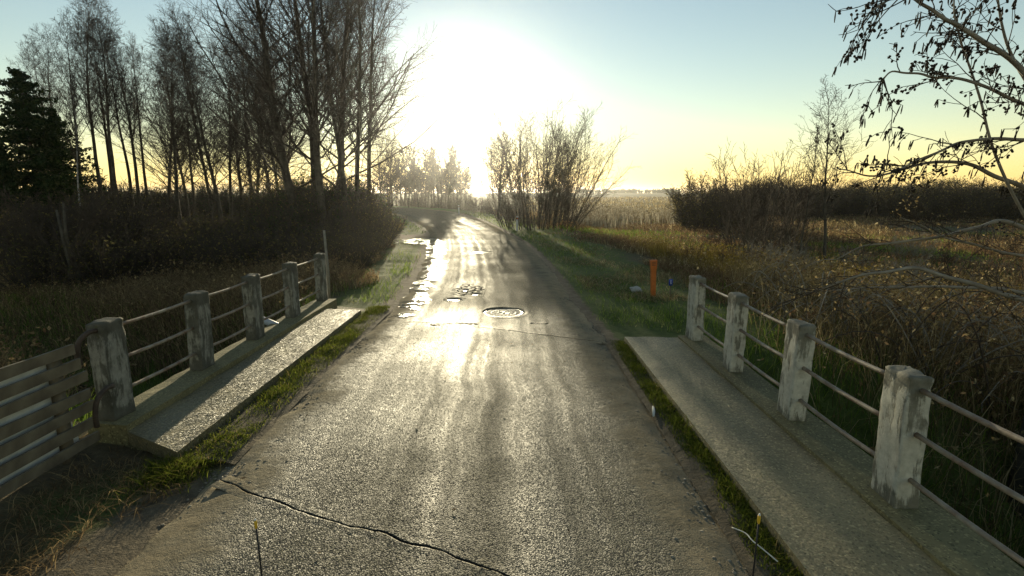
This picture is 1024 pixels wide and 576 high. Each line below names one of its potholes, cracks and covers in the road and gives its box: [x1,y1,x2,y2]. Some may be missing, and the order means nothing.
crack [389,319,604,344]
manhole cover [477,306,531,318]
crack [210,475,536,576]
